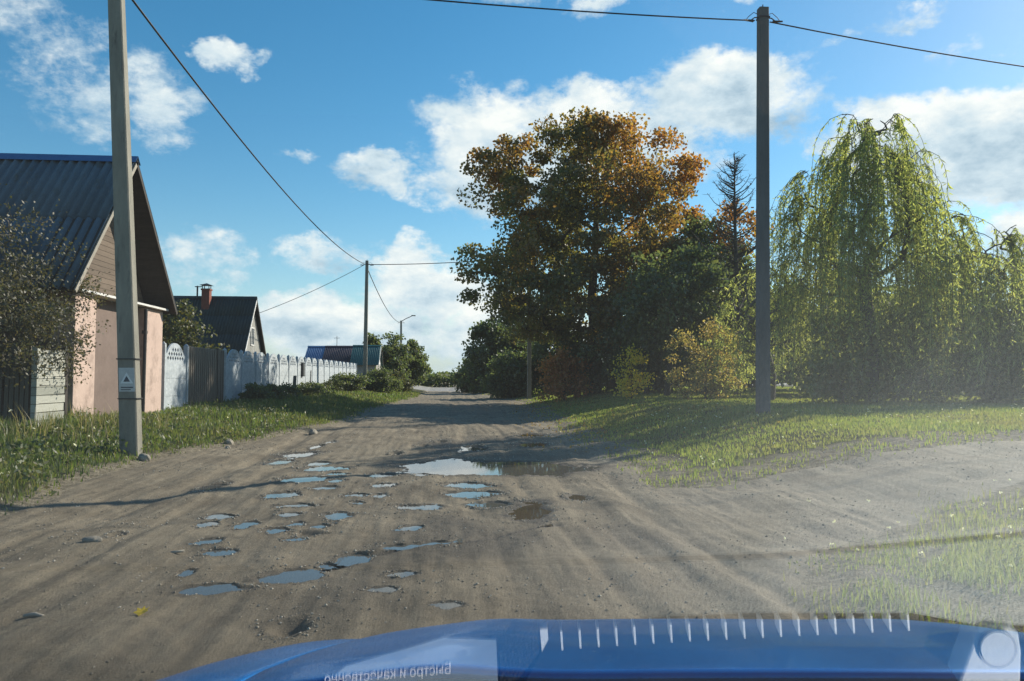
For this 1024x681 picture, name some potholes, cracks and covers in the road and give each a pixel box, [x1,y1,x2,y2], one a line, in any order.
pothole [243,566,330,585]
pothole [439,481,500,489]
pothole [367,538,463,552]
pothole [174,582,258,598]
pothole [381,569,423,579]
pothole [435,490,510,499]
pothole [496,498,559,527]
pothole [225,520,264,531]
pothole [429,600,469,610]
pothole [392,524,426,532]
pothole [263,475,332,484]
pothole [191,520,221,528]
